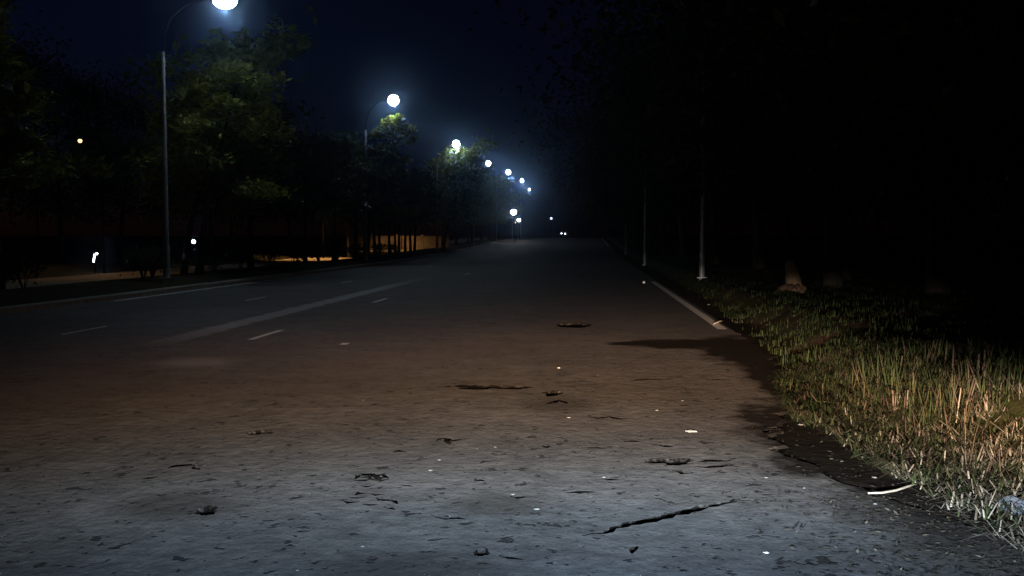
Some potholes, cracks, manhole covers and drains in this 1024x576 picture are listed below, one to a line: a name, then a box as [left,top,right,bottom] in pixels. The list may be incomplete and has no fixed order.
crack [565,479,749,554]
pothole [645,458,738,474]
crack [142,463,201,479]
